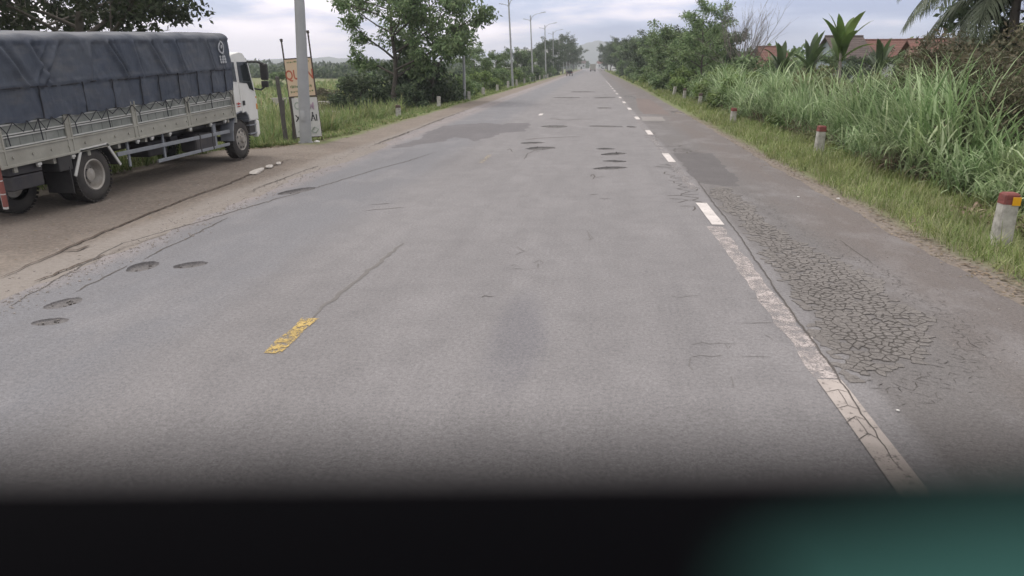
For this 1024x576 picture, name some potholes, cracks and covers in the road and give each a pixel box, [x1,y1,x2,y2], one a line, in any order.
pothole [31,318,69,326]
crack [644,121,1015,446]
pothole [126,261,159,272]
pothole [43,297,82,309]
crack [1,109,468,305]
